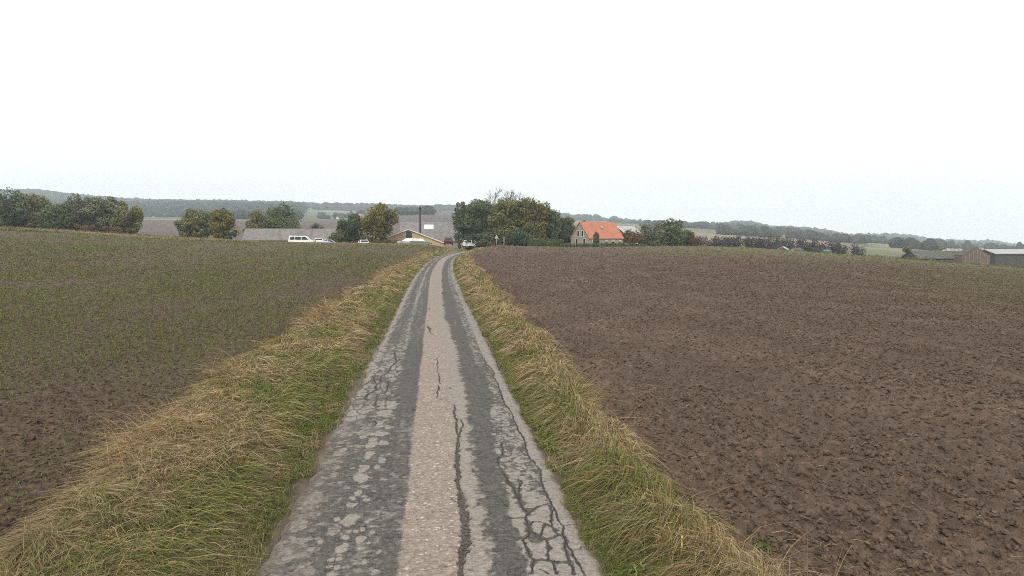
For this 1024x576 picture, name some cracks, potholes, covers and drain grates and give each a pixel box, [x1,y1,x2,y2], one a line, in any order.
crack [436,358,474,576]
crack [493,376,584,575]
